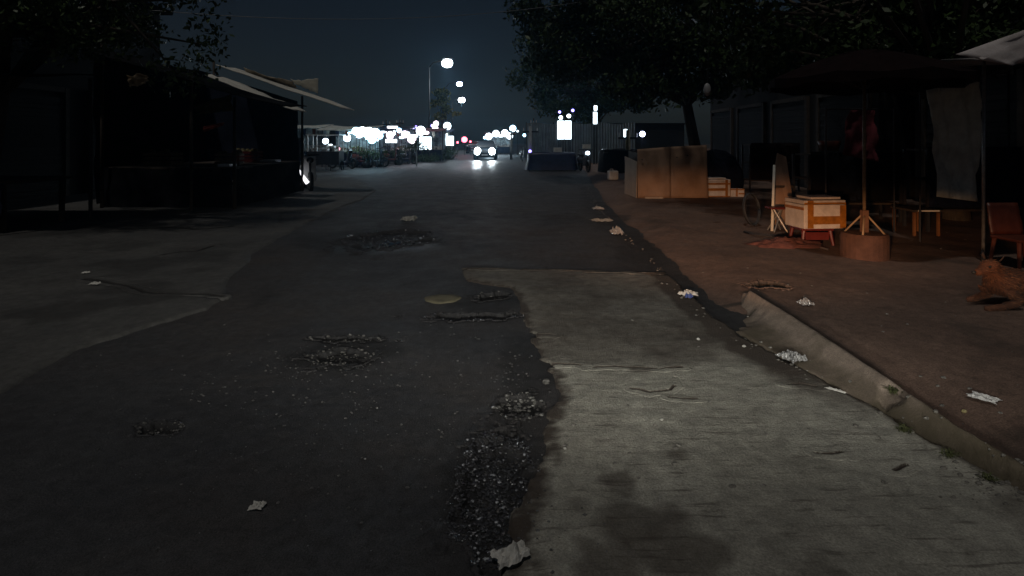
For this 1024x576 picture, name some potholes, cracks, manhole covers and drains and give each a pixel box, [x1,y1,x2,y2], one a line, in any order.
crack [76,277,233,301]
pothole [323,224,446,260]
pothole [292,345,383,373]
pothole [127,420,185,437]
pothole [416,412,540,576]
pothole [737,280,795,291]
pothole [464,290,515,303]
pothole [490,382,551,440]
pothole [392,308,525,324]
crack [550,360,707,403]
